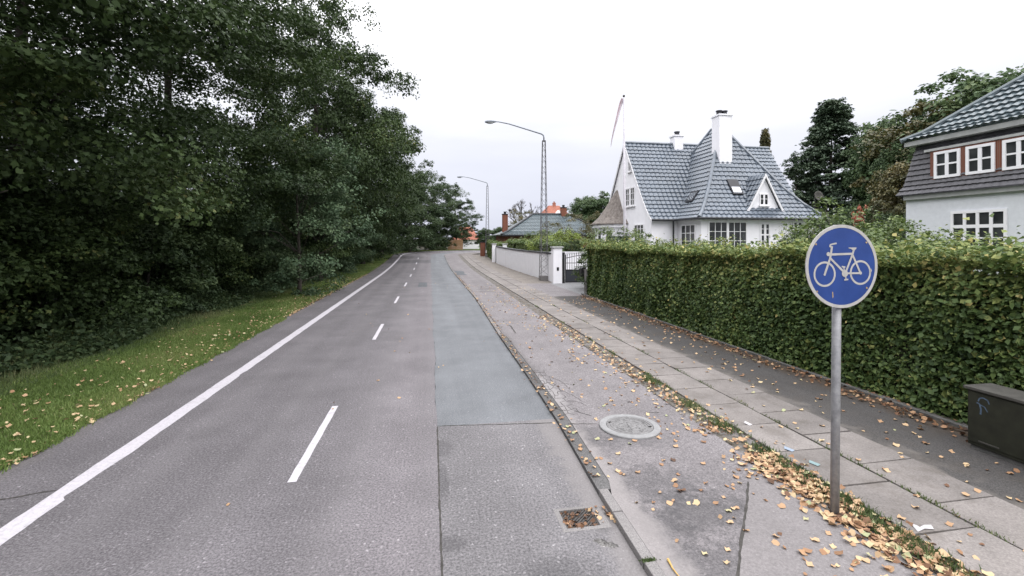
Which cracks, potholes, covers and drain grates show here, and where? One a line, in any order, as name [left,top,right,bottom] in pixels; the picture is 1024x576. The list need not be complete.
crack [533,370,592,424]
manhole cover [599,414,661,440]
drain grate [553,505,612,533]
